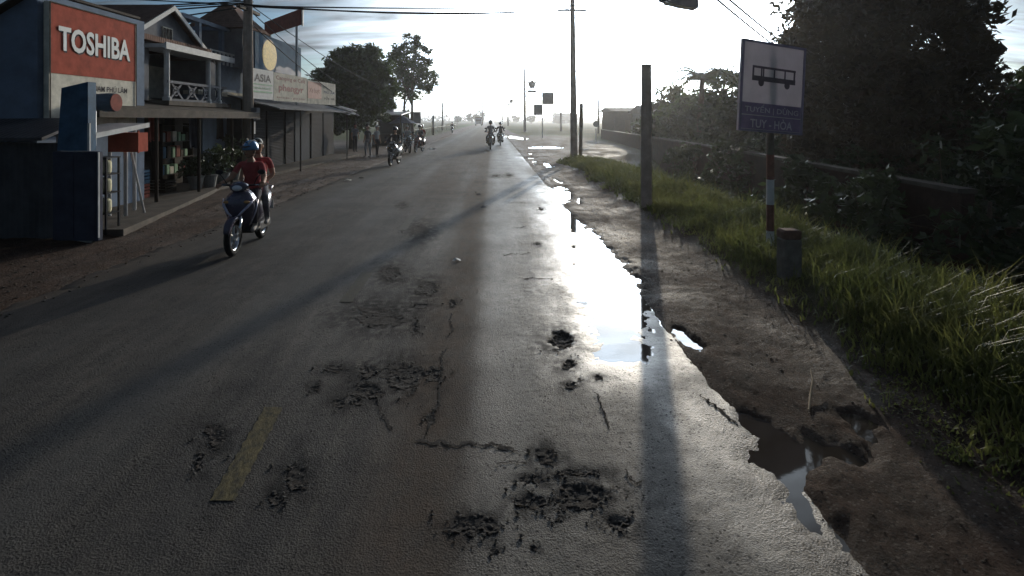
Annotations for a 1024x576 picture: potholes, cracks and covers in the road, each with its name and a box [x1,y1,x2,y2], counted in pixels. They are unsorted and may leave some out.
crack [594,392,610,428]
pothole [512,472,546,486]
pothole [527,469,645,513]
crack [363,313,527,465]
pothole [504,488,565,517]
pothole [525,447,558,473]
pothole [430,508,531,548]
pothole [269,460,318,505]
pothole [585,510,635,537]
pothole [191,424,233,457]
pothole [536,465,614,476]
pothole [191,451,206,476]
